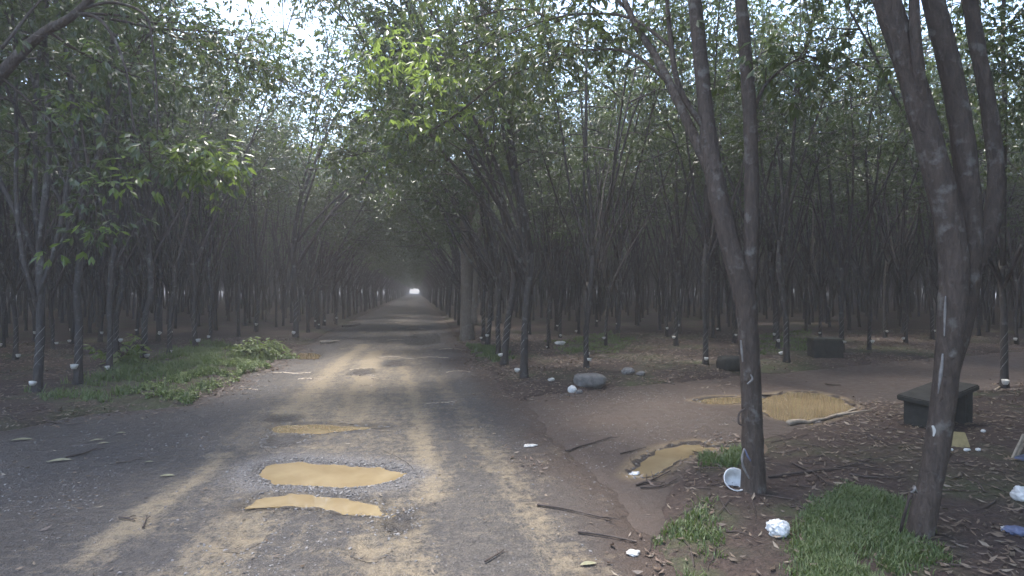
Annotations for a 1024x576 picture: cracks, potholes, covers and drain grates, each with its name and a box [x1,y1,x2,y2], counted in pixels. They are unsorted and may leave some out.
pothole [689,395,765,405]
pothole [218,452,439,499]
pothole [762,390,861,425]
pothole [254,420,394,435]
pothole [625,440,714,480]
pothole [239,487,405,520]
pothole [349,368,375,376]
